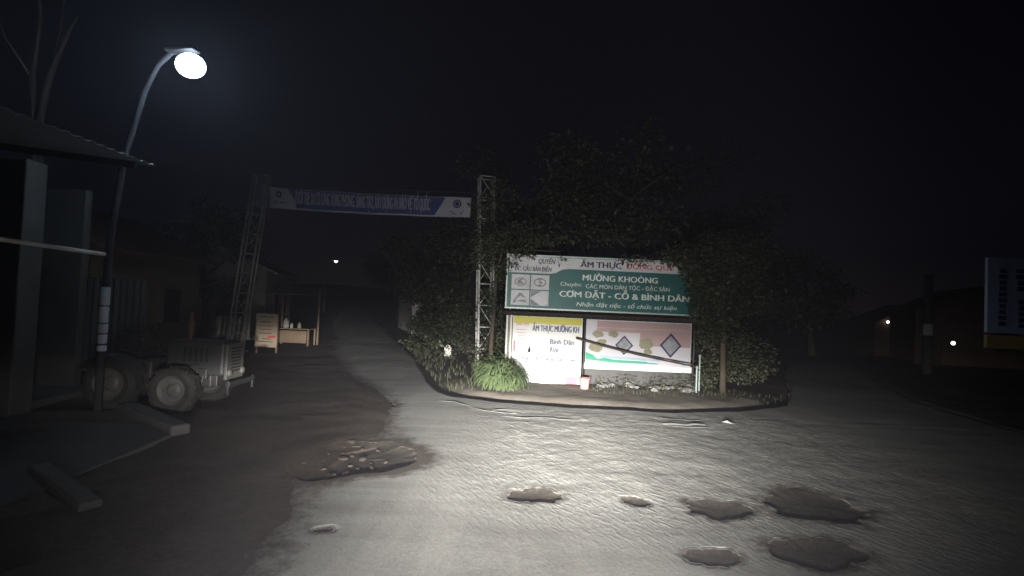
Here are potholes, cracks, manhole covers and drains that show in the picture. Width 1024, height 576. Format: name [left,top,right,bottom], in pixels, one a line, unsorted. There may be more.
pothole [504,487,566,504]
pothole [762,536,875,575]
crack [447,400,574,420]
pothole [619,496,653,508]
pothole [682,498,758,522]
pothole [679,547,746,569]
pothole [311,525,337,534]
crack [658,417,711,428]
pothole [292,440,420,483]
pothole [759,486,876,526]
